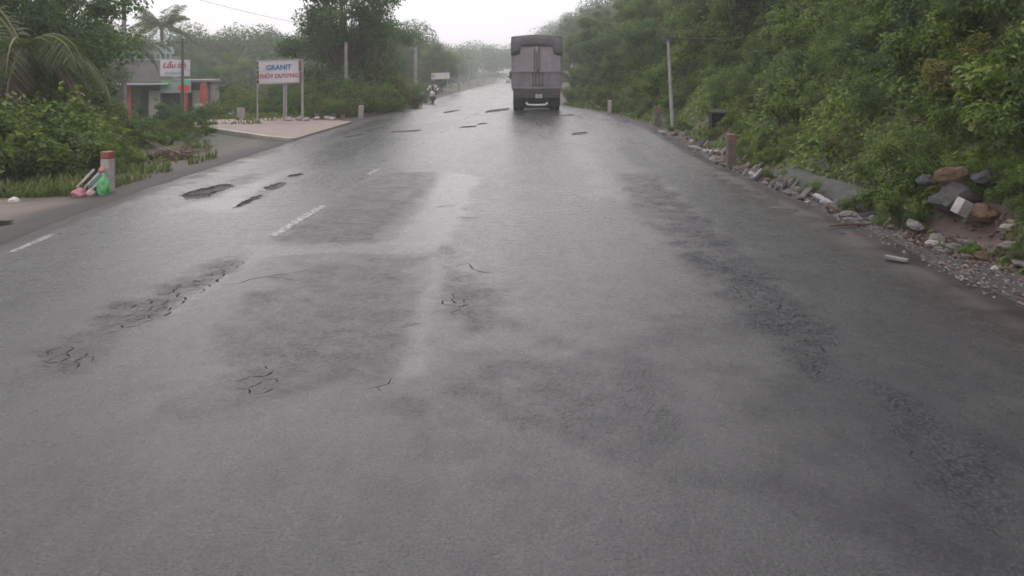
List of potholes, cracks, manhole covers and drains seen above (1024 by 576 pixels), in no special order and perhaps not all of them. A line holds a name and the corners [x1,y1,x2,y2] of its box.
crack [236,365,278,394]
crack [42,347,95,368]
crack [716,267,825,357]
pothole [179,184,235,200]
crack [108,262,305,333]
